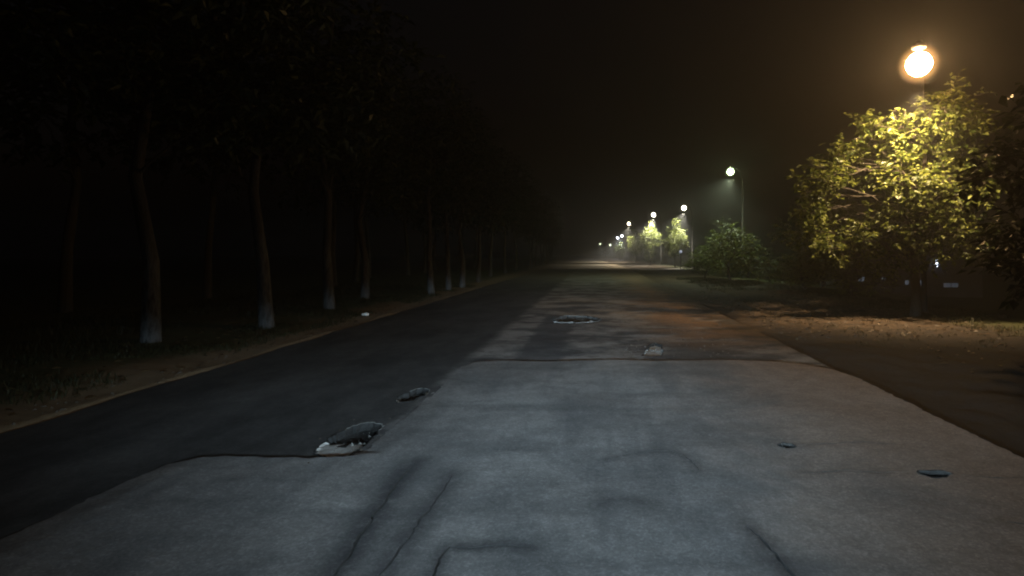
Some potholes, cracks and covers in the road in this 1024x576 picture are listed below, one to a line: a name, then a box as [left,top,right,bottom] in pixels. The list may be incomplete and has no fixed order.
crack [332,463,532,576]
pothole [308,418,392,463]
pothole [551,315,602,323]
crack [746,526,795,576]
pothole [641,342,667,357]
pothole [395,388,434,403]
